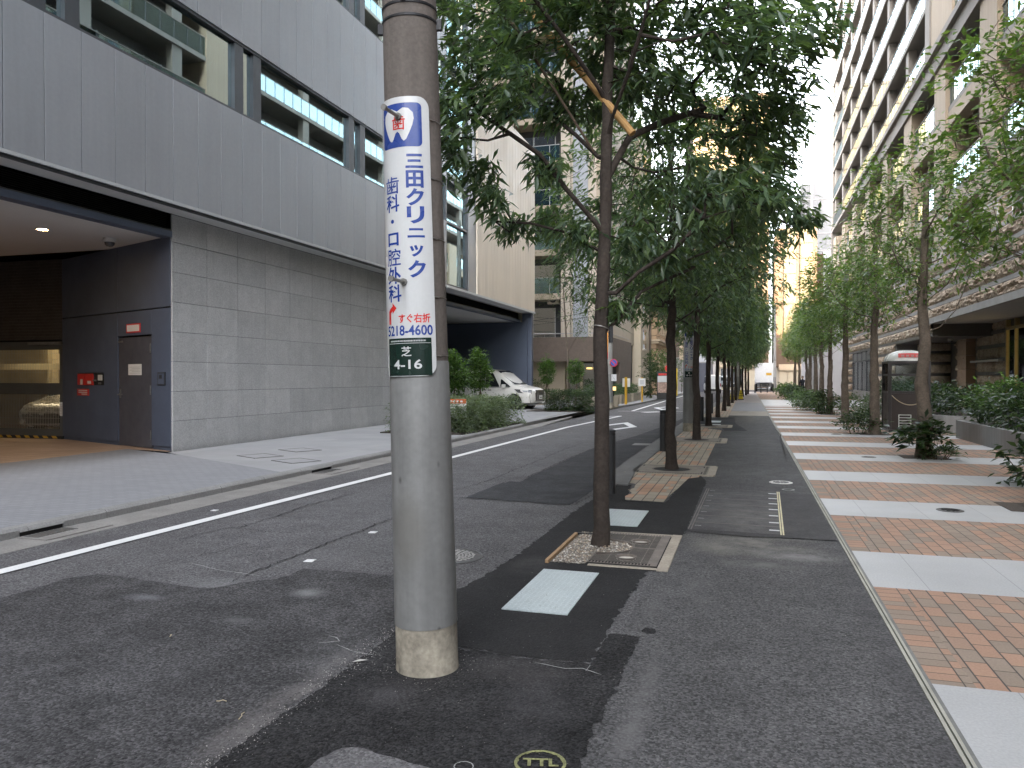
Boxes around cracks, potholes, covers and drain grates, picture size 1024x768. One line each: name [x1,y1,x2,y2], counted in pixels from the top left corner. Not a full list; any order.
drain grate [17,523,113,541]
crack [135,493,392,582]
manhole cover [455,548,483,564]
